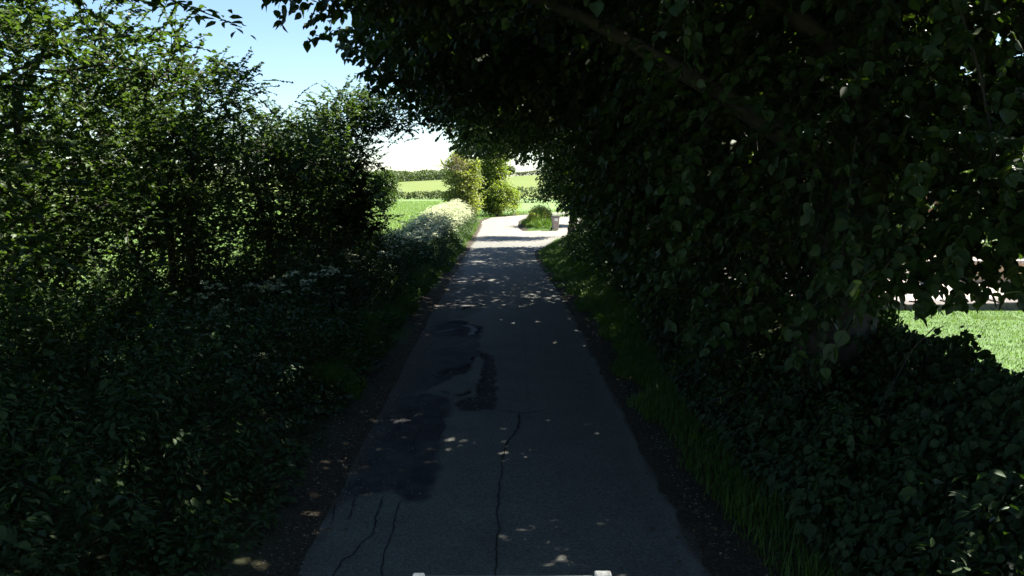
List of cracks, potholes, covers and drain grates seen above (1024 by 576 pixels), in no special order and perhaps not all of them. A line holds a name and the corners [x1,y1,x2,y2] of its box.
crack [332,496,401,576]
pothole [450,350,504,413]
pothole [426,320,484,337]
crack [494,410,543,576]
